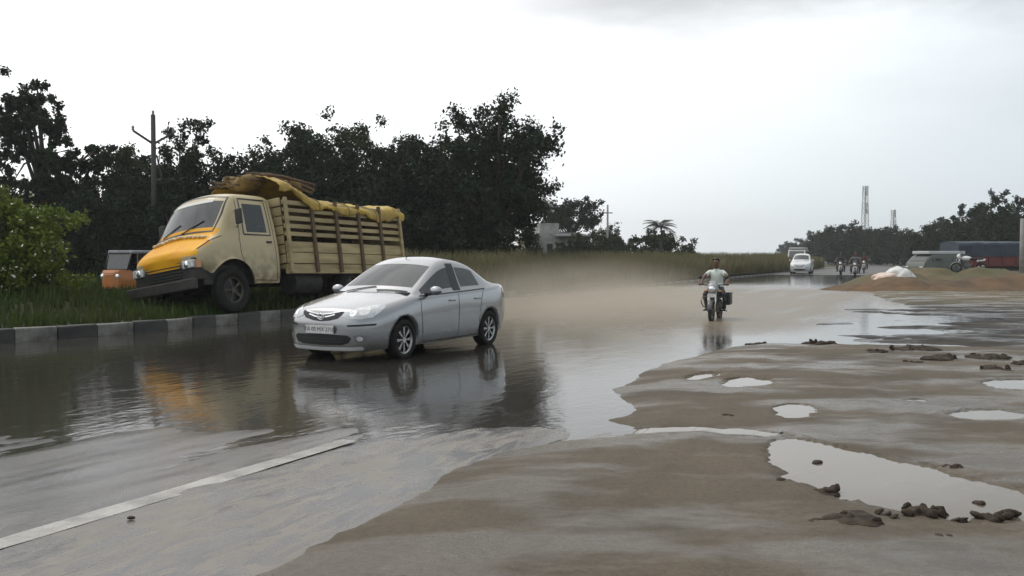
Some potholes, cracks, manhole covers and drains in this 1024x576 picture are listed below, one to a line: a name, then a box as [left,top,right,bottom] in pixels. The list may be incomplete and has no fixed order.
pothole [759,400,832,421]
pothole [969,377,1024,391]
pothole [710,375,787,388]
pothole [928,406,1024,422]
pothole [679,370,730,381]
pothole [748,434,1024,532]
